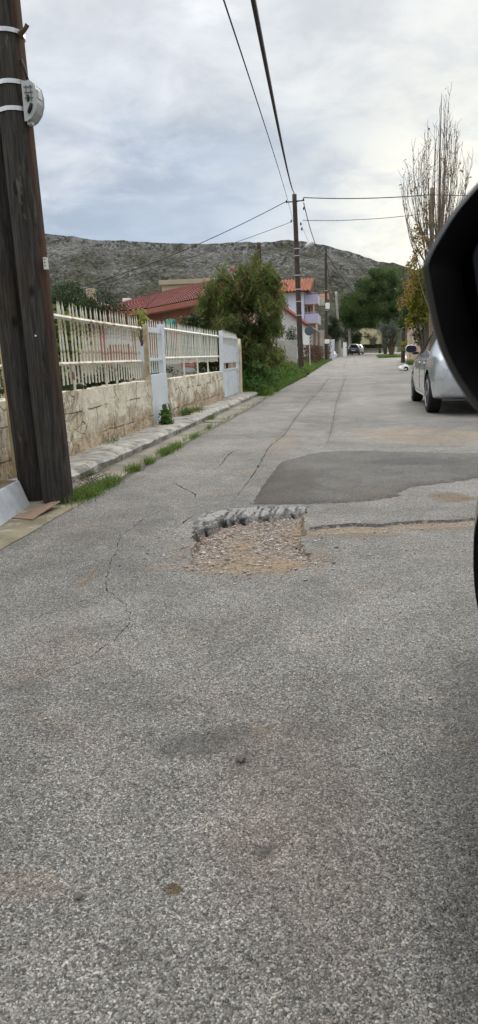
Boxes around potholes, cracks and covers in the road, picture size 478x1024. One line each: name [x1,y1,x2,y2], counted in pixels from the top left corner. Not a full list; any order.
crack [214,364,346,504]
pothole [182,506,313,572]
crack [9,501,194,679]
